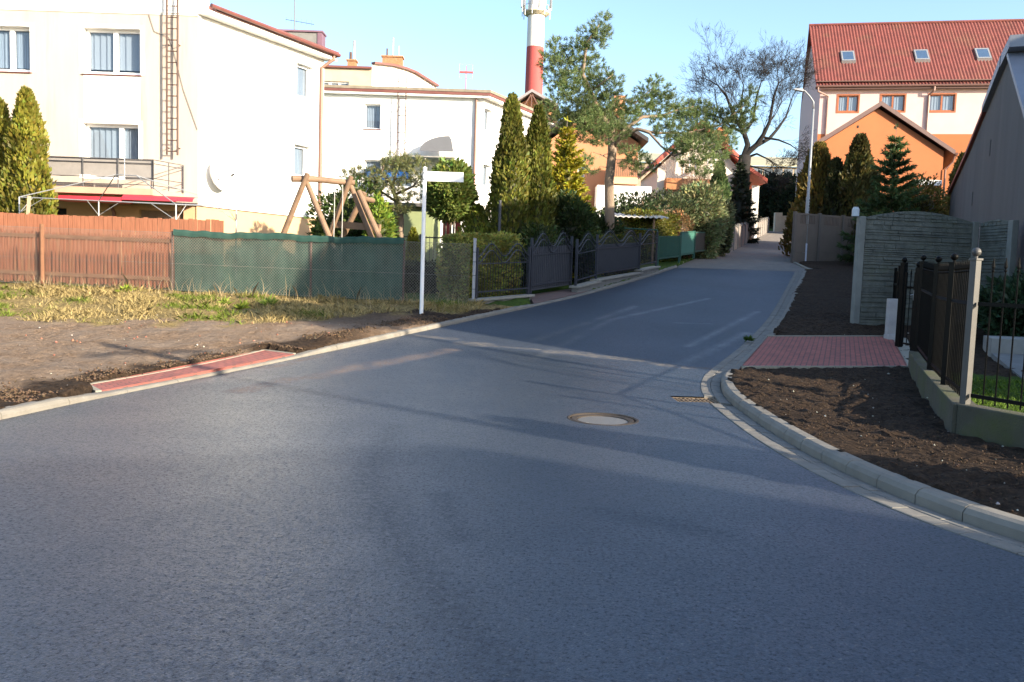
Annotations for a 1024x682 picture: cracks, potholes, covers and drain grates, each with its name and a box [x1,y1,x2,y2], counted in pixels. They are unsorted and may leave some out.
manhole cover [567,412,639,426]
